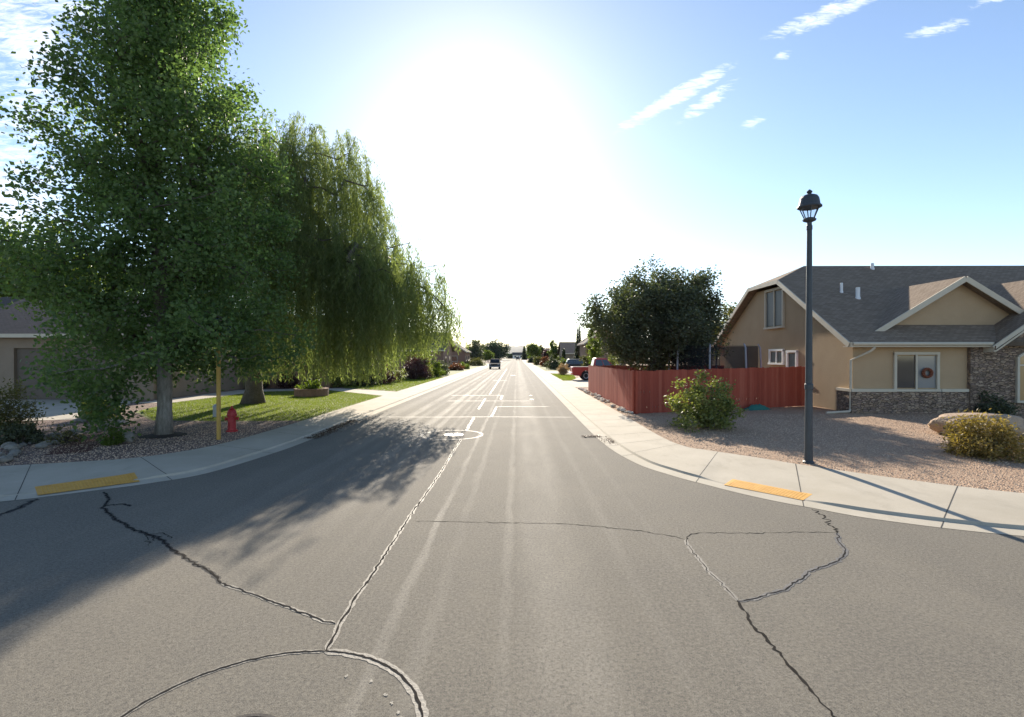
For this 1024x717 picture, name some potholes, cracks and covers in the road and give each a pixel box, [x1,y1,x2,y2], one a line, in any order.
crack [0,499,40,516]
crack [418,510,849,717]
crack [100,492,336,624]
